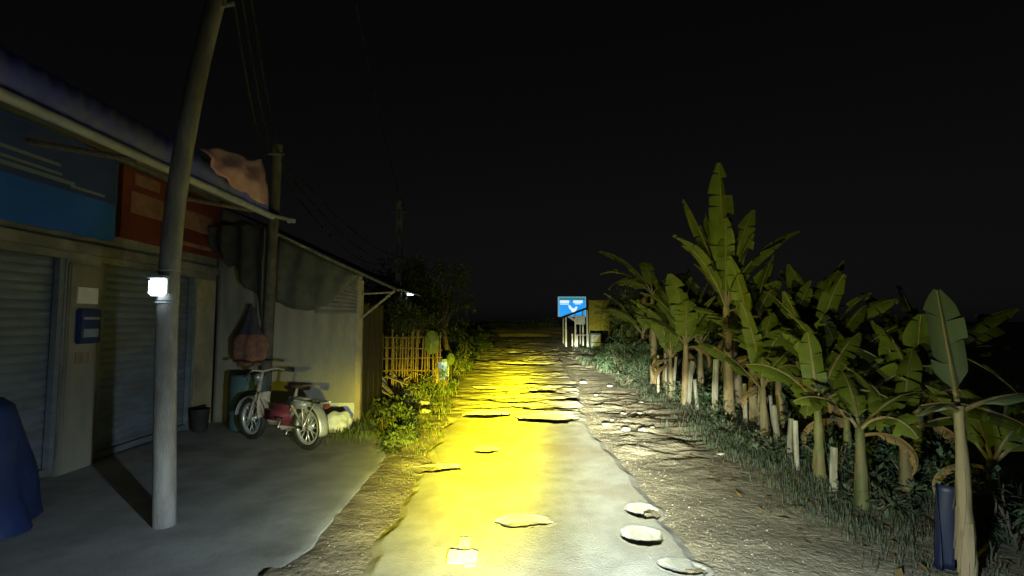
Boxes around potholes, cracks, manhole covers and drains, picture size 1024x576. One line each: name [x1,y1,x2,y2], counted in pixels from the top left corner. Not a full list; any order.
pothole [470,445,504,455]
pothole [508,410,587,425]
pothole [652,556,714,576]
pothole [406,462,468,475]
pothole [457,409,519,419]
pothole [616,523,668,548]
pothole [488,513,559,530]
pothole [621,501,665,522]
